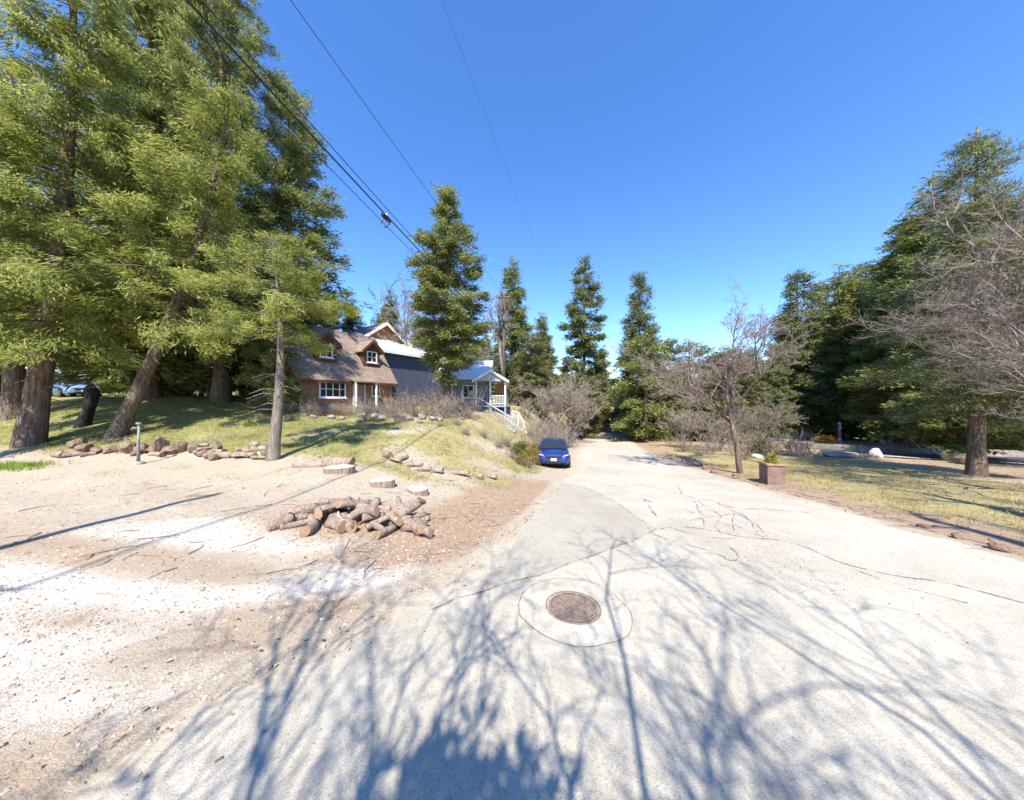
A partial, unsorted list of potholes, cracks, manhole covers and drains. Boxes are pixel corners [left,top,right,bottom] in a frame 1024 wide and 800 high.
crack [644,485,1024,603]
